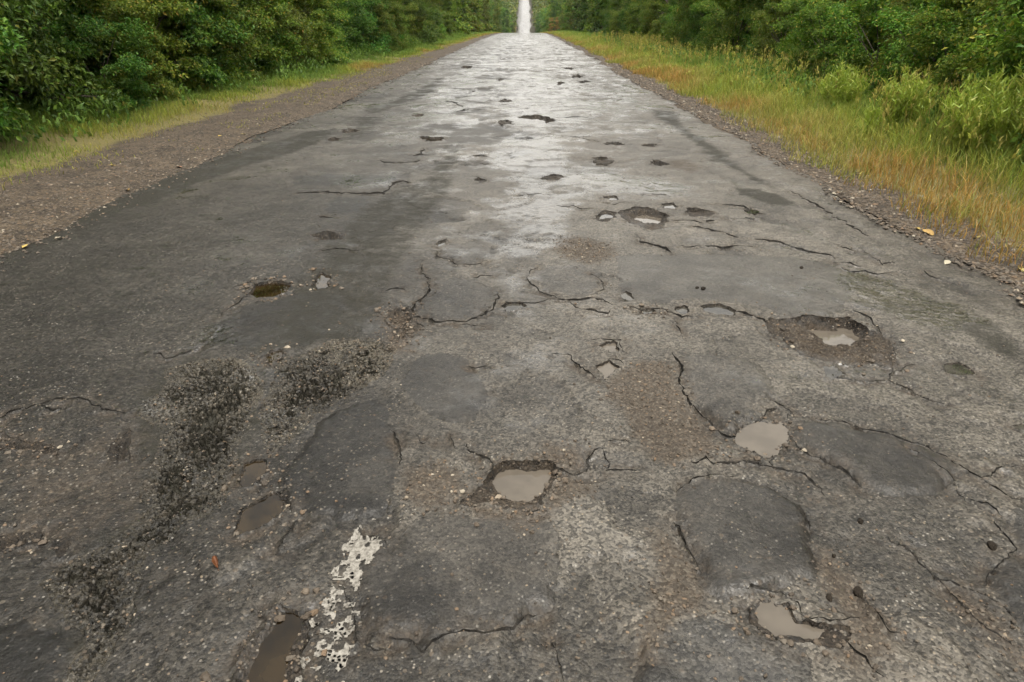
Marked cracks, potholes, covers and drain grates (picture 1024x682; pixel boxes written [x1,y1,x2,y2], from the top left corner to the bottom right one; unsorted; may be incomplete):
crack [639,190,895,275]
pothole [460,459,559,511]
pothole [234,491,286,536]
pothole [749,594,852,650]
pothole [765,315,898,368]
pothole [518,114,555,123]
pothole [735,421,789,459]
pothole [592,156,615,166]
pothole [239,459,269,488]
crack [0,252,1024,682]
pothole [249,280,291,298]
